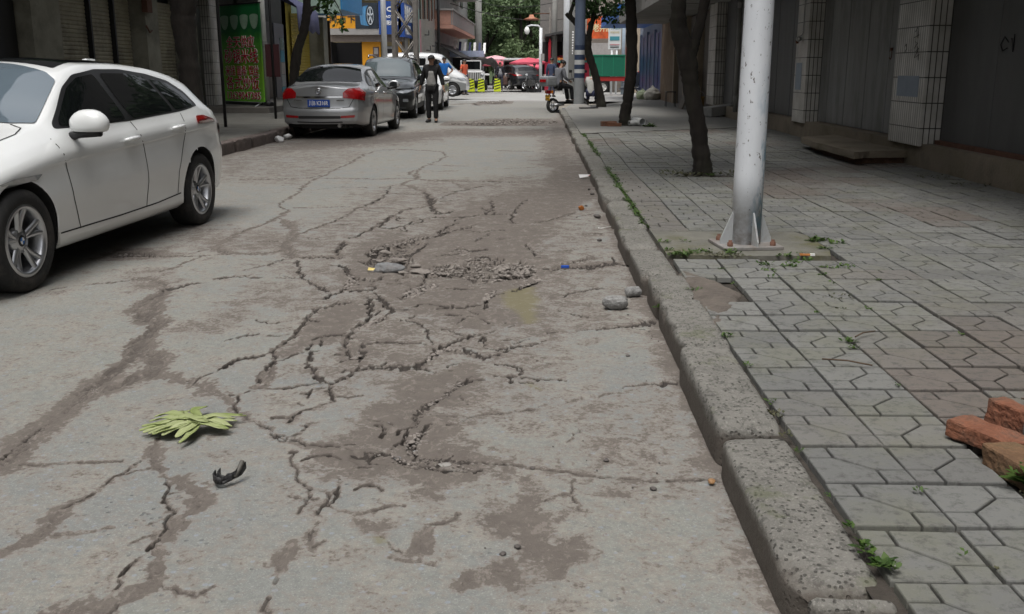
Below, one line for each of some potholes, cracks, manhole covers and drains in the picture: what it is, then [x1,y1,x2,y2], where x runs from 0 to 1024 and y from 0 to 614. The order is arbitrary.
crack [0,149,721,614]
pothole [349,240,539,302]
